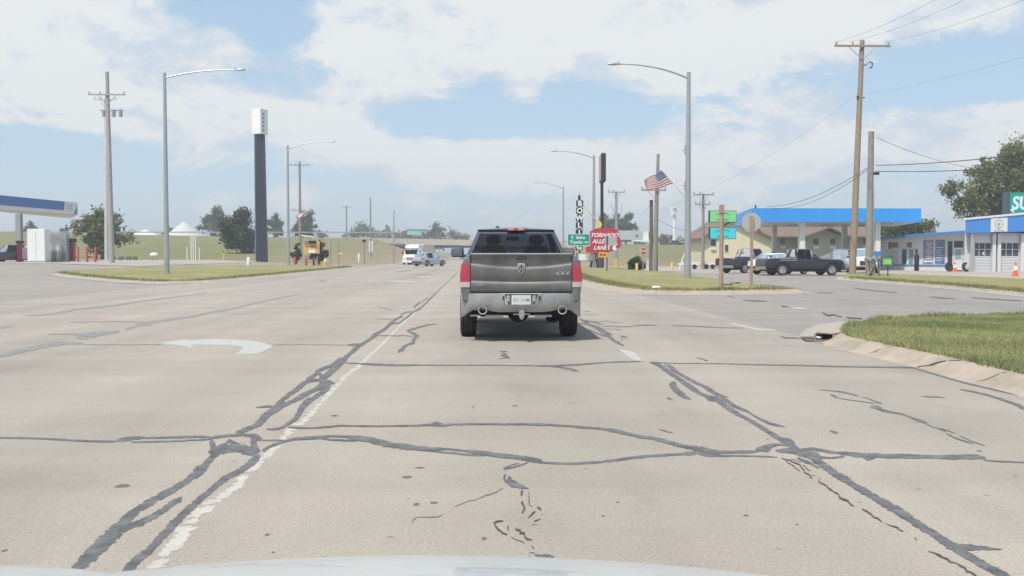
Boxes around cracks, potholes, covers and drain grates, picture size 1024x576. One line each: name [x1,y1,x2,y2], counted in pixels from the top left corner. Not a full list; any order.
crack [493,490,543,553]
crack [412,488,502,522]
drain grate [800,330,842,342]
